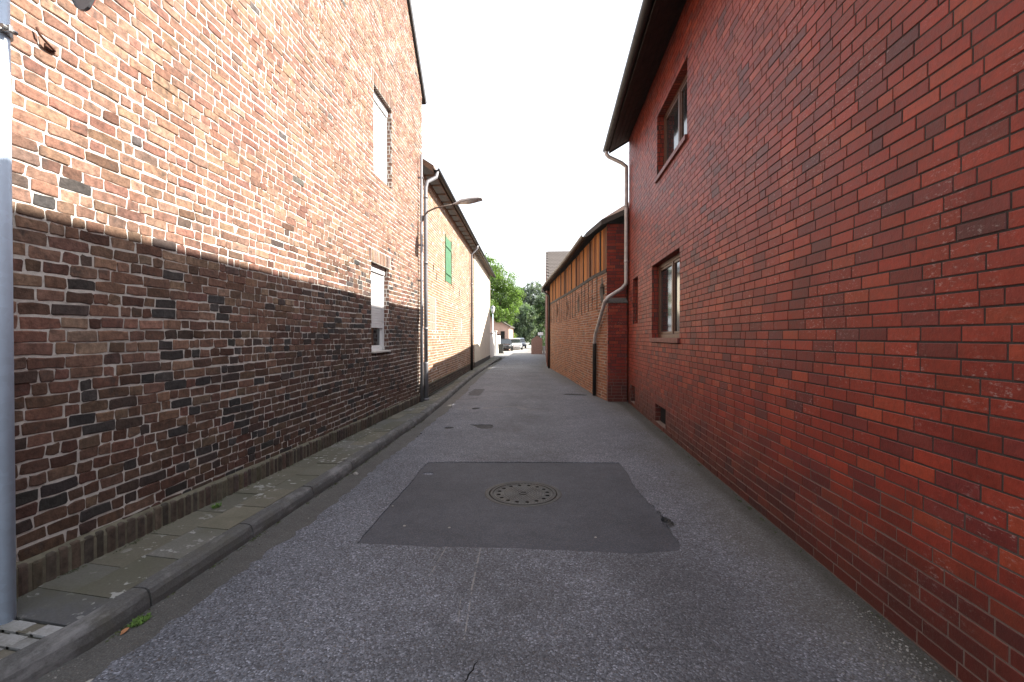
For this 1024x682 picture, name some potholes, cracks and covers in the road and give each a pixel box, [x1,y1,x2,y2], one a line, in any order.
manhole cover [485,481,562,507]
